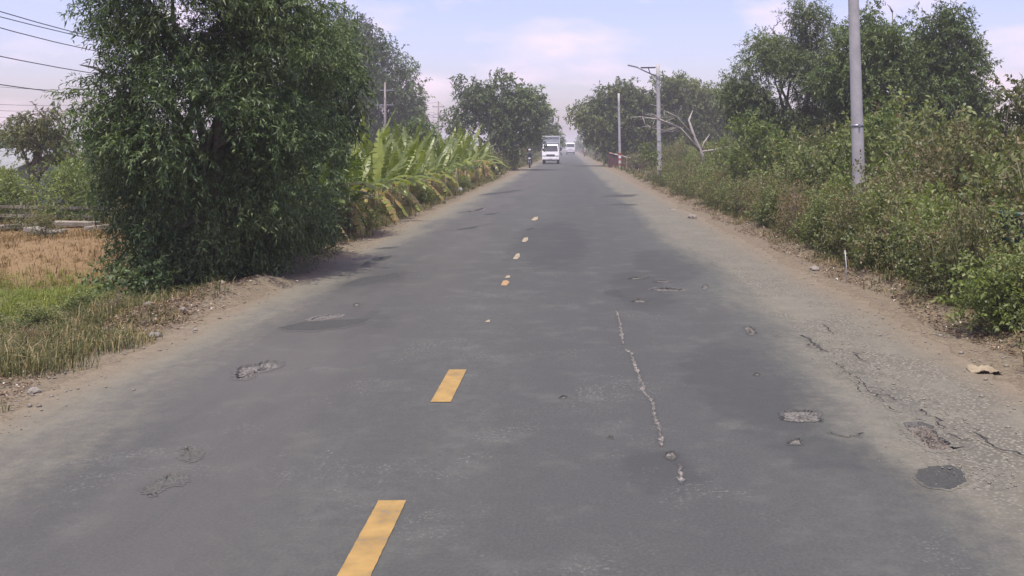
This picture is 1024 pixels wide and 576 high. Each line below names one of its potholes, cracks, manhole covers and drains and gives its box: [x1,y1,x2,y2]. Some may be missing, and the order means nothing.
pothole [176,444,206,463]
crack [798,324,1024,457]
crack [614,310,687,485]
pothole [785,438,805,446]
pothole [742,325,758,336]
pothole [137,472,191,497]
pothole [896,420,972,453]
pothole [230,359,285,381]
pothole [778,409,824,423]
